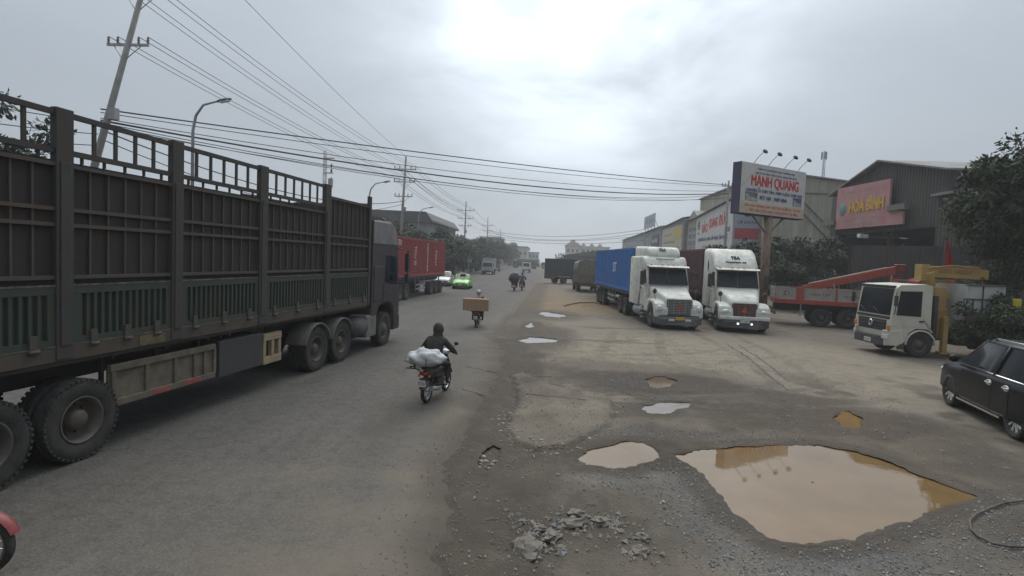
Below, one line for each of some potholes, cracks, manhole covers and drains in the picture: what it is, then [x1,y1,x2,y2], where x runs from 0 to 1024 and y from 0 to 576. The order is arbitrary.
pothole [668,442,988,549]
pothole [469,441,509,476]
pothole [569,438,669,471]
pothole [826,409,870,430]
pothole [514,336,563,344]
pothole [640,375,683,389]
pothole [635,399,696,415]
